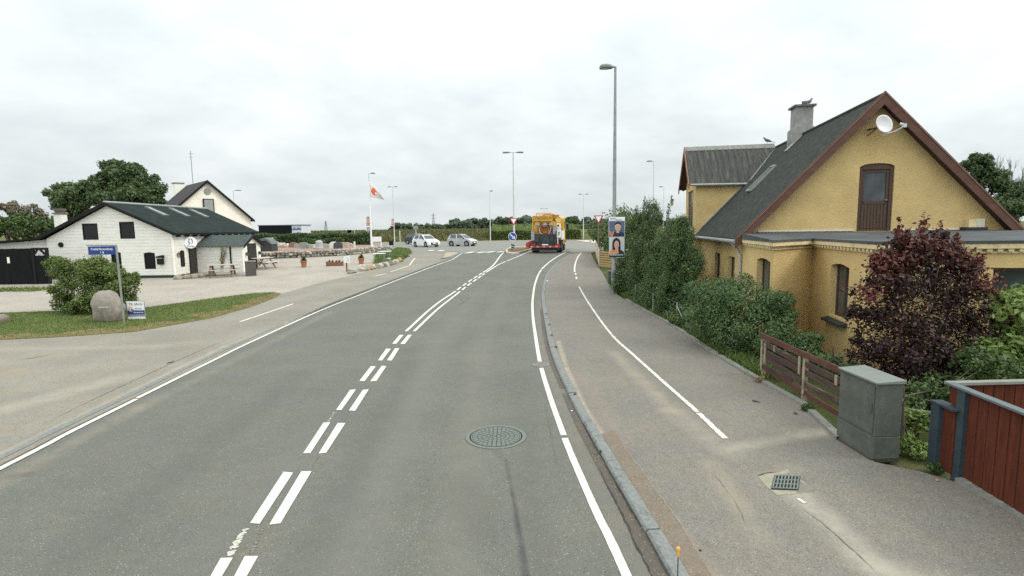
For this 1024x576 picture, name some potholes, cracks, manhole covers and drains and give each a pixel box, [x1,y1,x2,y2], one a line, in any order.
drain grate [758,469,814,495]
manhole cover [466,425,526,449]
